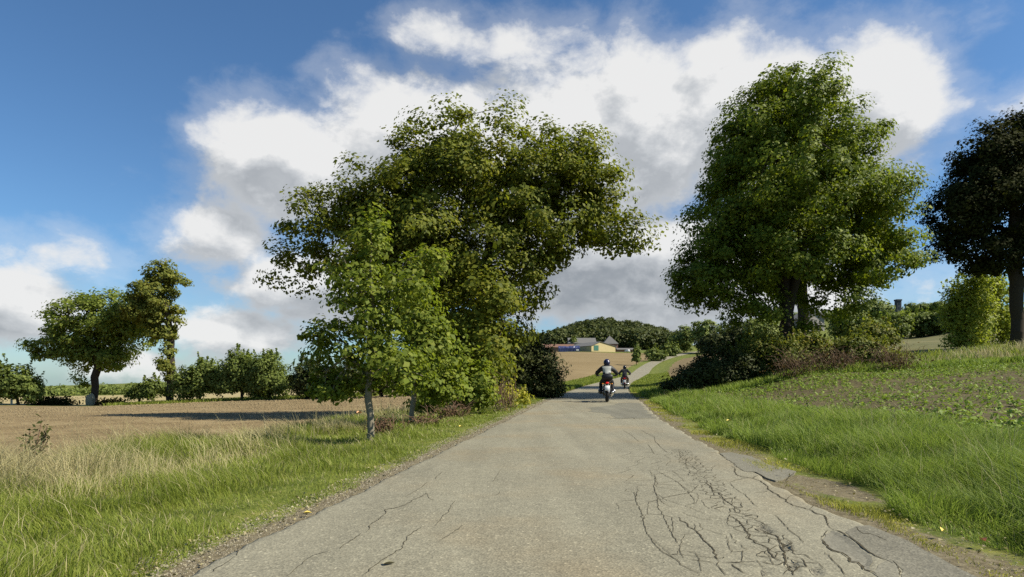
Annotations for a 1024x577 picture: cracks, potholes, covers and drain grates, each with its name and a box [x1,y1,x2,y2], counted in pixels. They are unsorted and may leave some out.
crack [291,476,463,573]
crack [622,430,901,575]
